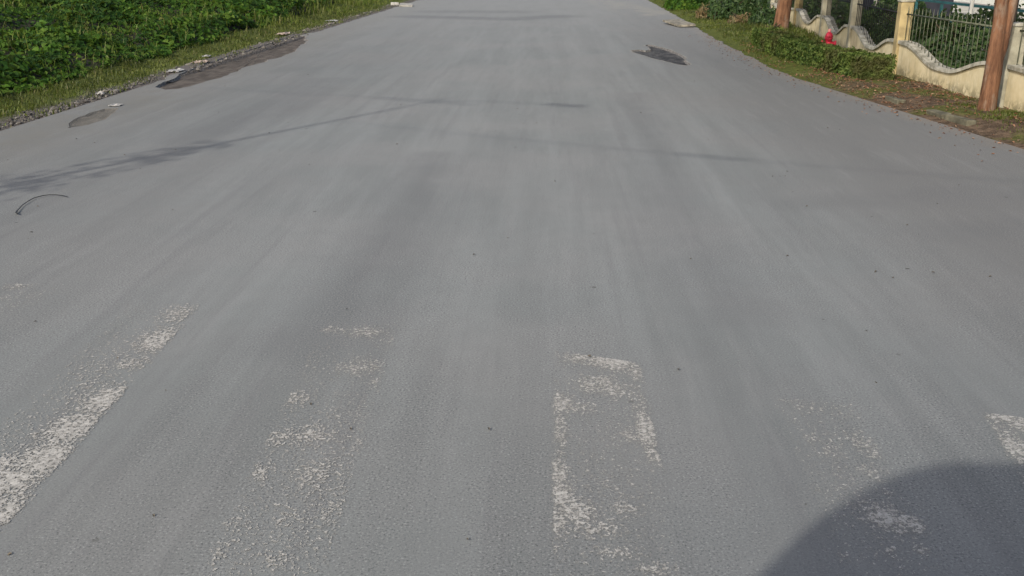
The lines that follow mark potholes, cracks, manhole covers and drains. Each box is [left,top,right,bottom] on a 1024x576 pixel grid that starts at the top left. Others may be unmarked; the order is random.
pothole [630,44,692,66]
pothole [156,35,309,90]
